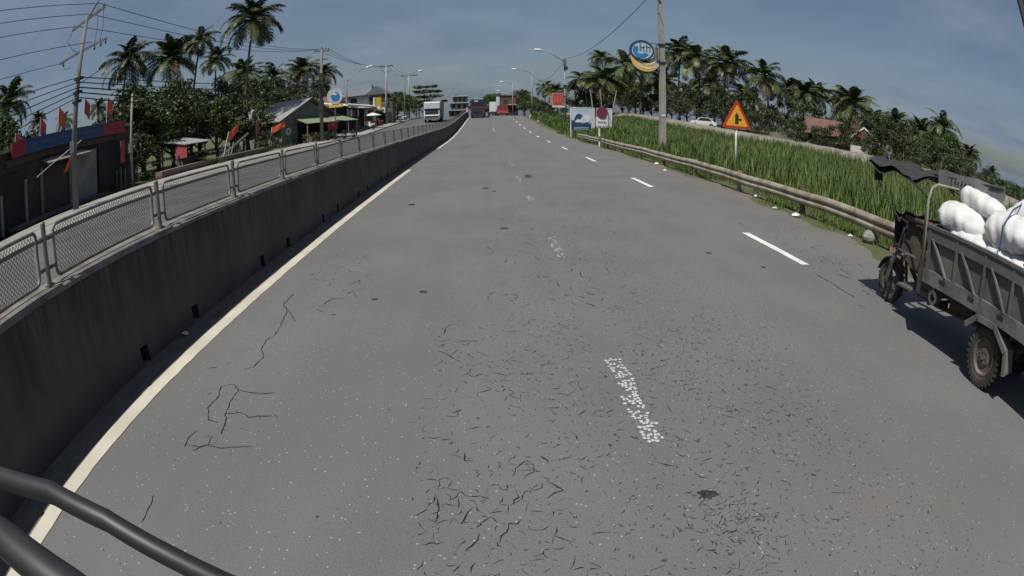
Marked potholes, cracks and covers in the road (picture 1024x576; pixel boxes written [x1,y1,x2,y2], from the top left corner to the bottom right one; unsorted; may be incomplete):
pothole [697,490,719,500]
crack [409,444,672,576]
crack [184,255,370,450]
